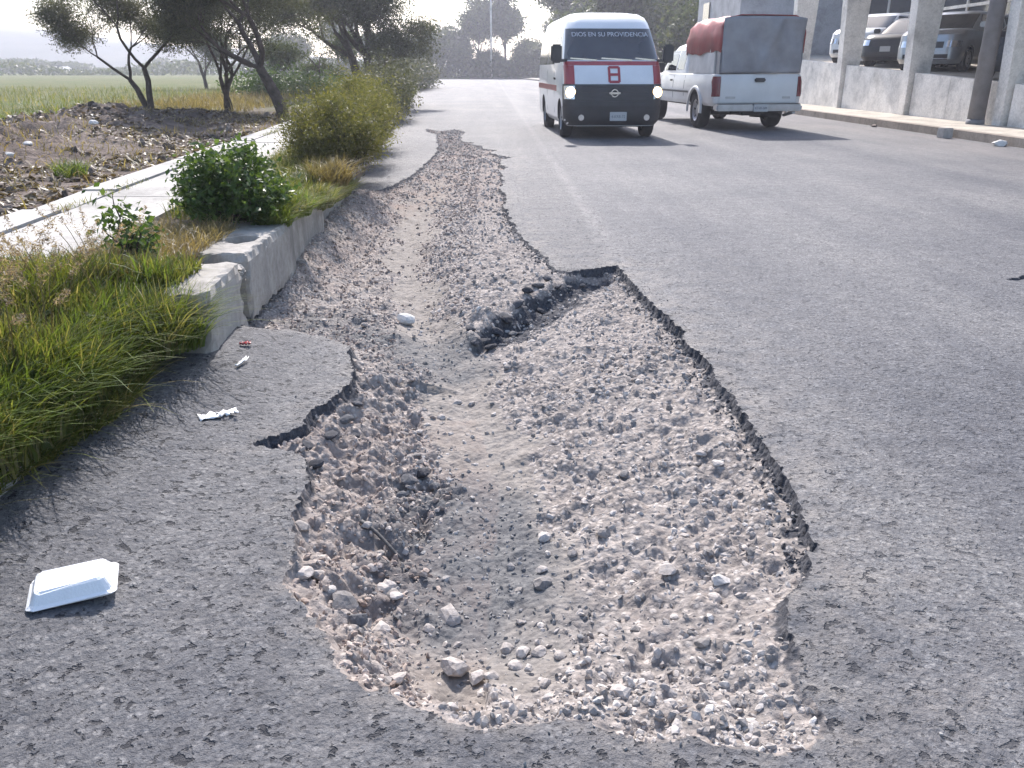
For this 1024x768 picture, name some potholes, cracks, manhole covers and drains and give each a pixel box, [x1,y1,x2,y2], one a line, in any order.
pothole [246,129,827,756]
